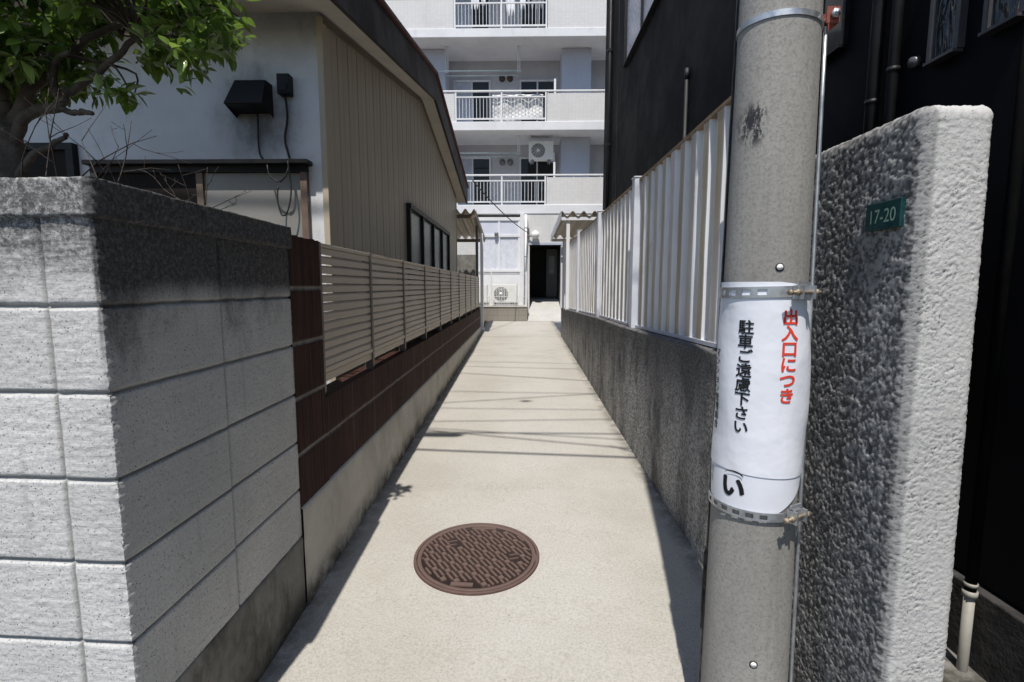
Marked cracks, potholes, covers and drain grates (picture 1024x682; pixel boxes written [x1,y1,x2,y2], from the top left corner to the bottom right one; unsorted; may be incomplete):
manhole cover [413,523,539,596]
